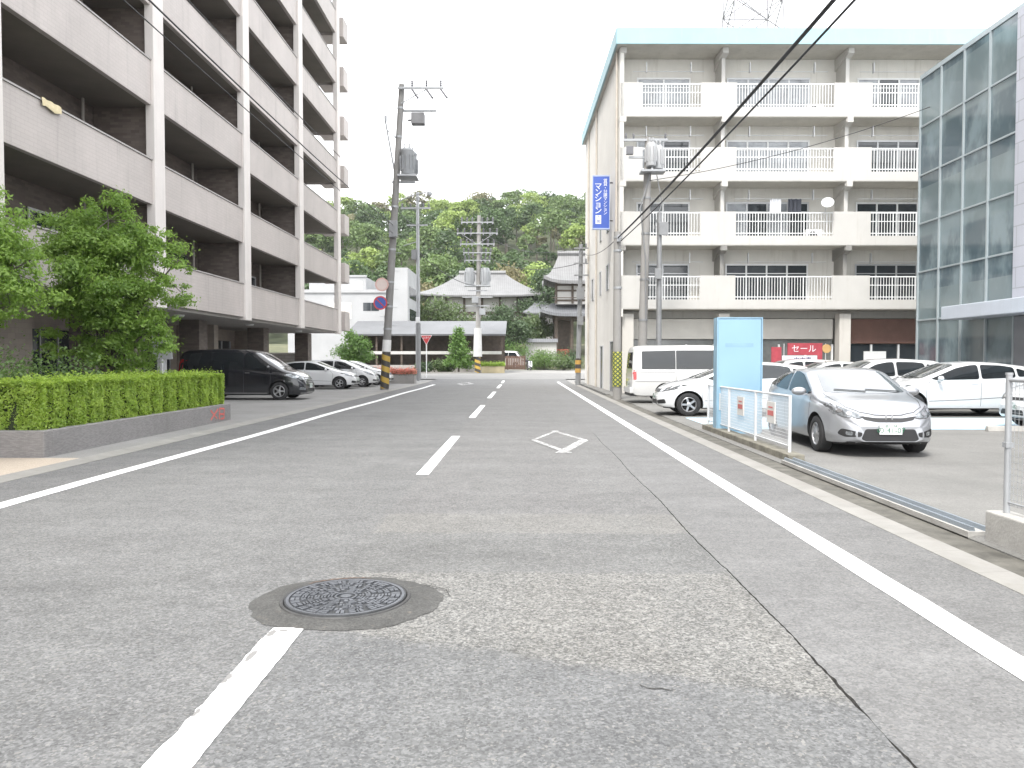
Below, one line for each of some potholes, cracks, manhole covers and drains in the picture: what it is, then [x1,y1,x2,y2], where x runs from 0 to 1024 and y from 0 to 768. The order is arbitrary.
crack [597,437,917,768]
manhole cover [248,577,444,631]
